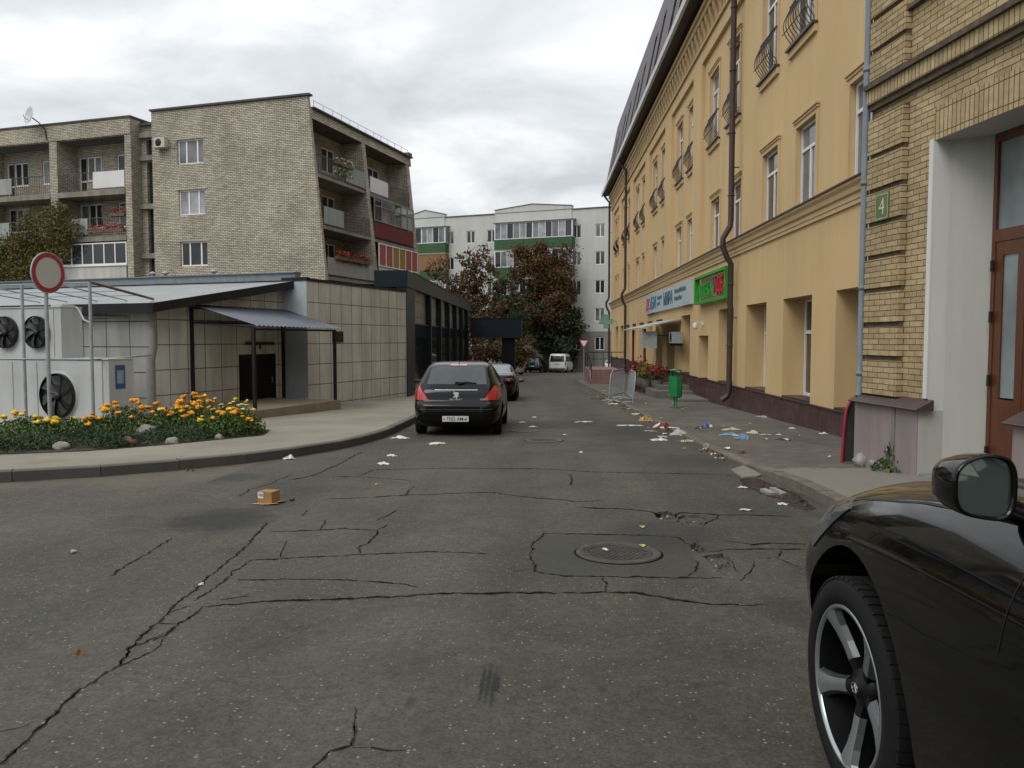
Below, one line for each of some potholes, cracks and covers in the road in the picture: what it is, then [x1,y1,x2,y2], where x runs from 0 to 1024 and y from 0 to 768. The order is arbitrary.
pothole [676,515,709,526]
pothole [689,543,706,553]
crack [0,452,806,764]
manhole cover [574,542,663,564]
pothole [654,511,678,521]
pothole [702,553,731,575]
